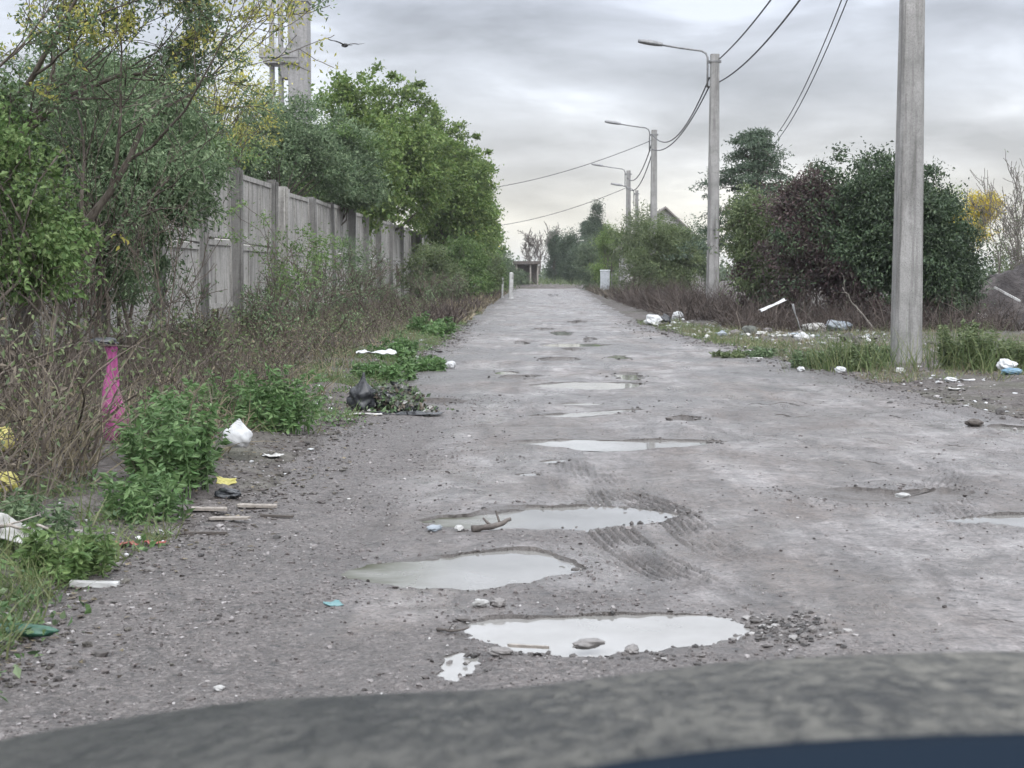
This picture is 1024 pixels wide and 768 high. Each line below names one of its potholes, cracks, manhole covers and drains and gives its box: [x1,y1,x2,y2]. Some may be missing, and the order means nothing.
pothole [524,381,648,390]
pothole [416,504,703,533]
pothole [788,484,998,505]
pothole [944,512,1024,527]
pothole [529,406,644,417]
pothole [511,437,727,452]
pothole [600,372,648,381]
pothole [443,603,853,666]
pothole [337,546,599,591]
pothole [436,651,504,682]
